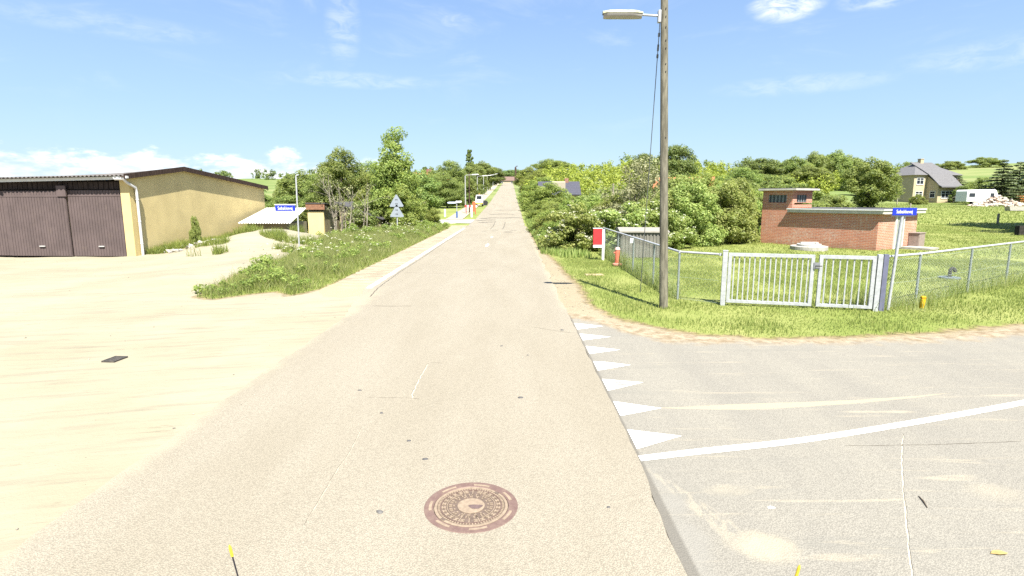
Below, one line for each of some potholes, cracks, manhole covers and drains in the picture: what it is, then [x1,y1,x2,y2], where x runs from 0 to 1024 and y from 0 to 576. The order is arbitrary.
crack [901,434,913,576]
crack [372,364,428,399]
manhole cover [424,482,518,533]
crack [305,429,361,523]
